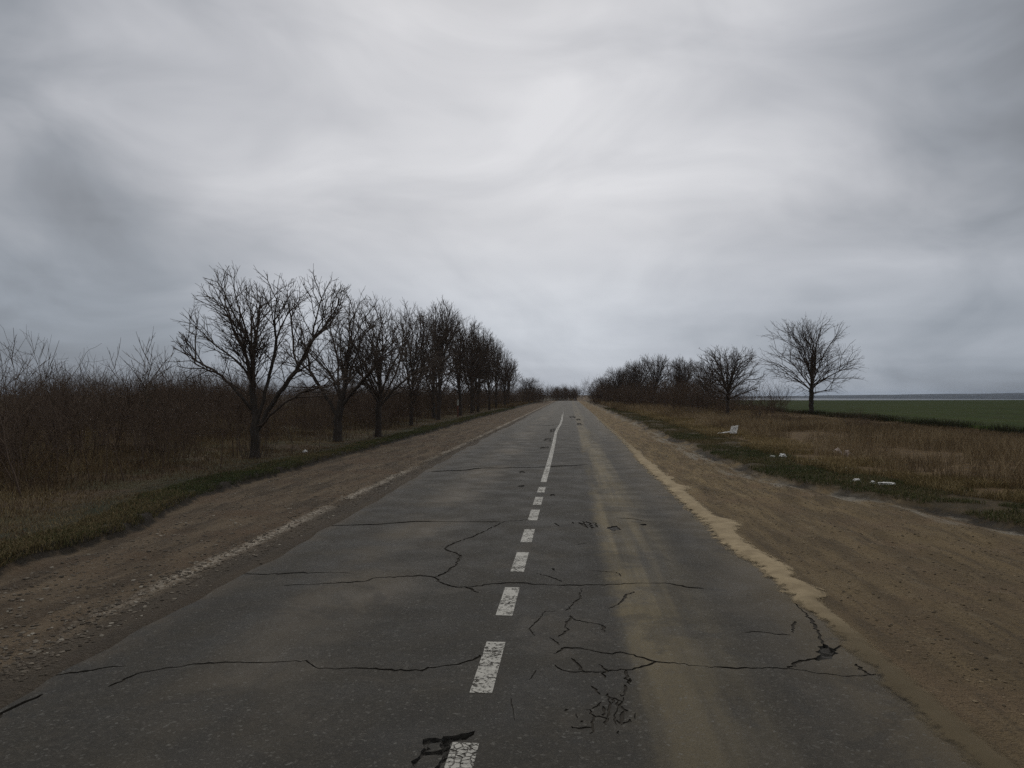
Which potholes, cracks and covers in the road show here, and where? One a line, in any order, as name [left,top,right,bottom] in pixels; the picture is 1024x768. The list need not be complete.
pothole [411,731,475,768]
crack [0,694,43,718]
crack [55,655,481,687]
pothole [814,644,839,661]
crack [247,519,876,734]
